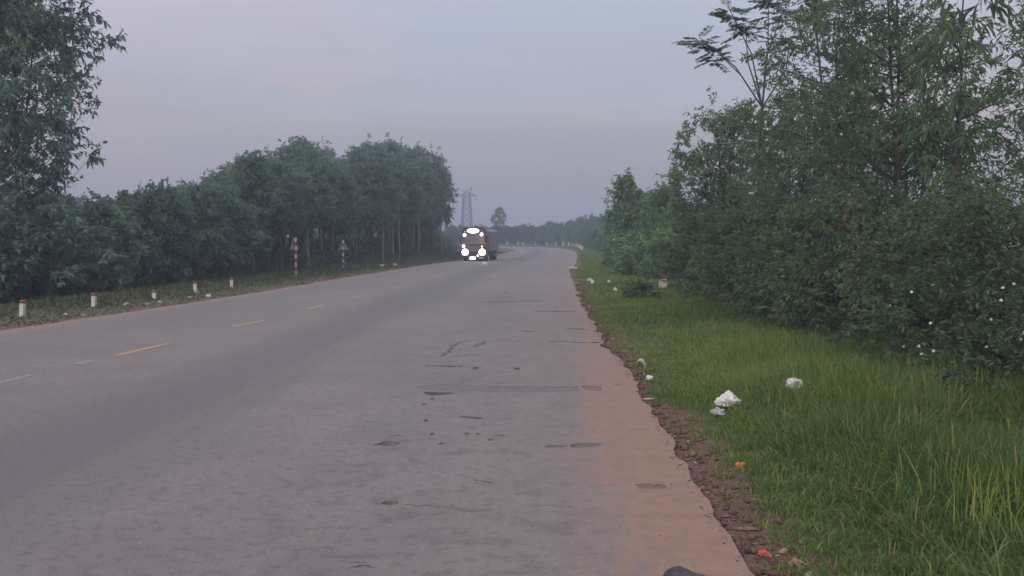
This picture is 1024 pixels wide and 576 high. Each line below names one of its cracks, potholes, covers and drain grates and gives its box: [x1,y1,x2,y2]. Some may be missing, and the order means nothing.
crack [406,301,586,367]
crack [405,504,493,514]
